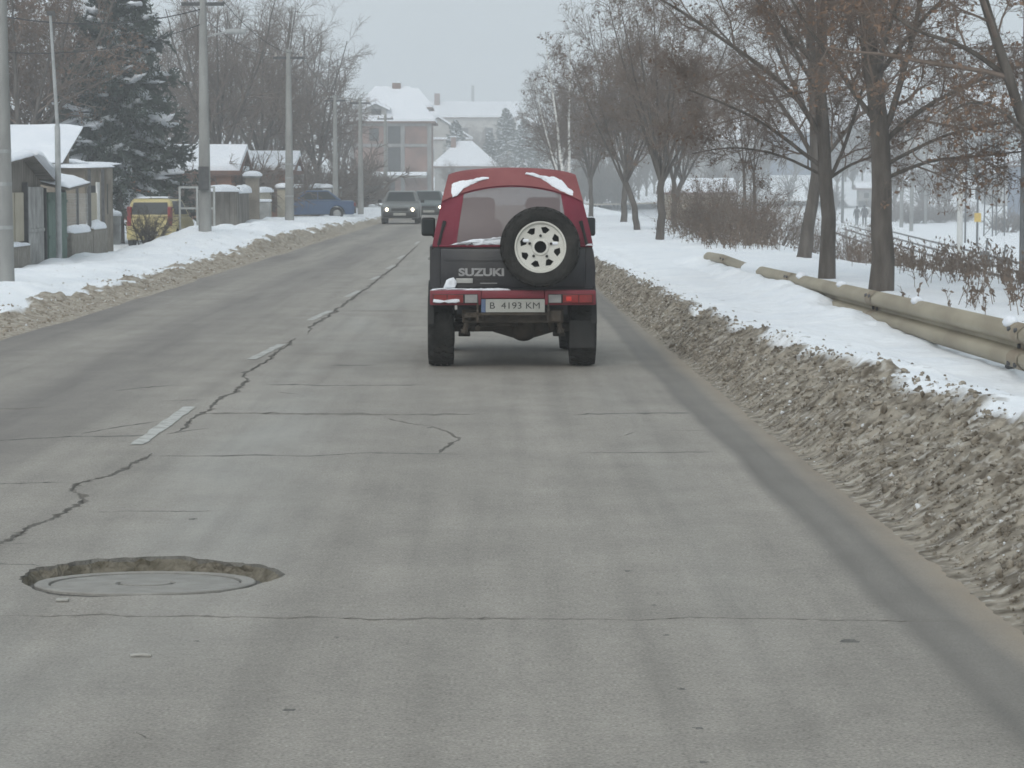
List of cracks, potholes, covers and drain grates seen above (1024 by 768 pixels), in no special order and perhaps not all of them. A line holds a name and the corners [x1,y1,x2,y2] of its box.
manhole cover [29,571,262,597]
crack [273,384,410,394]
crack [0,412,468,457]
